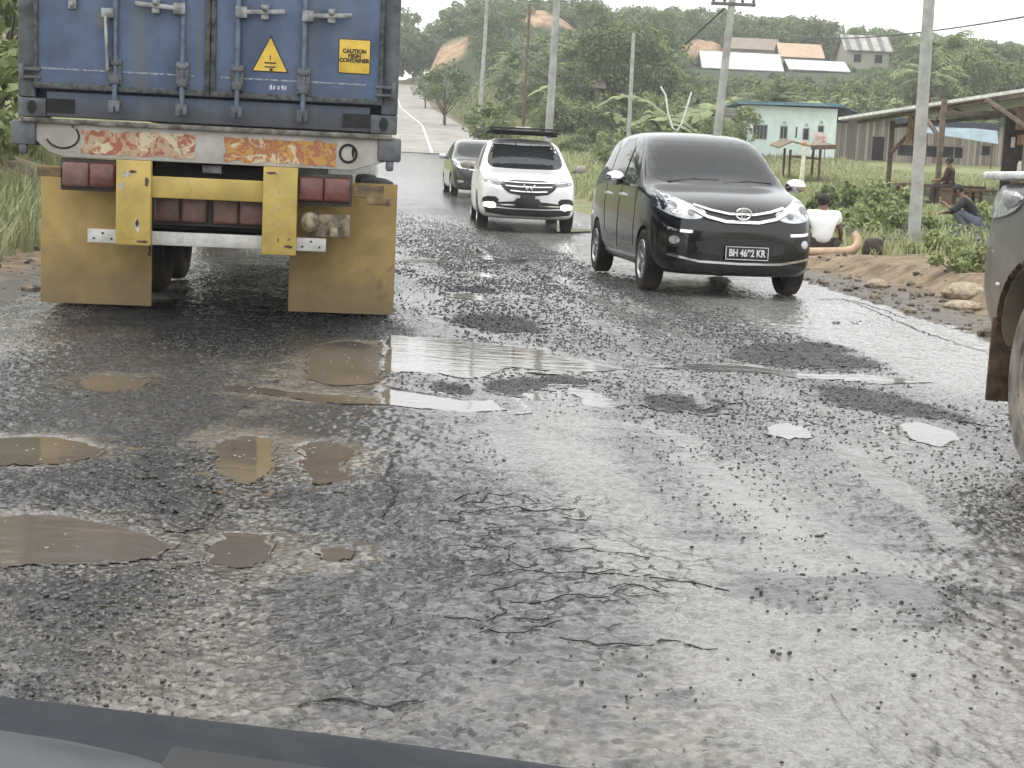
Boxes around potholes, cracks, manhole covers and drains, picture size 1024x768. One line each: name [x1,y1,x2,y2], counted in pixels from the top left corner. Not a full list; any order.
pothole [356,385,532,416]
crack [298,697,418,708]
pothole [177,524,303,582]
pothole [62,372,167,395]
pothole [195,430,303,495]
pothole [315,538,384,570]
pothole [360,331,643,383]
pothole [634,392,742,416]
pothole [0,506,209,570]
pothole [429,380,472,396]
crack [438,487,730,650]
pothole [287,338,384,390]
